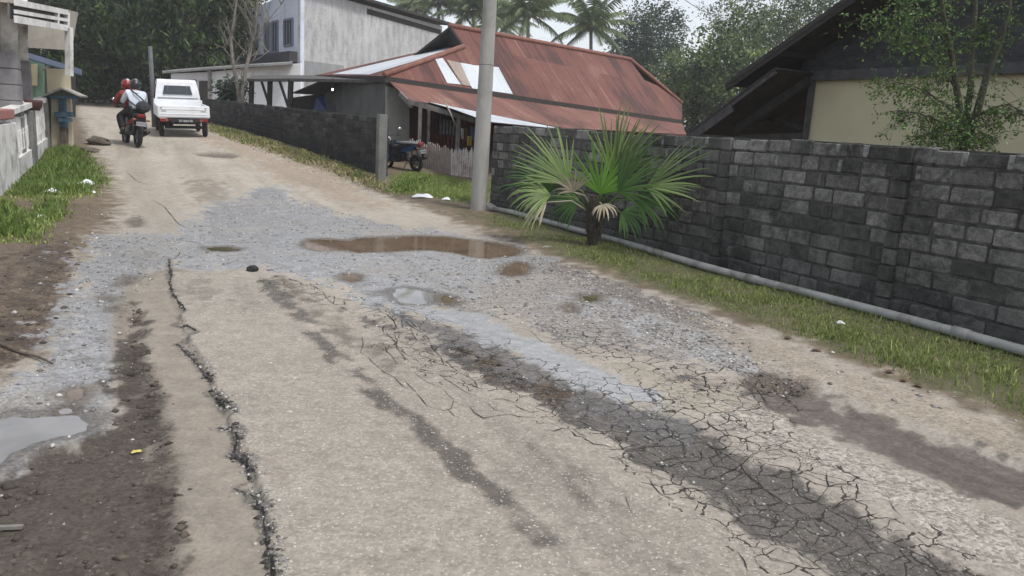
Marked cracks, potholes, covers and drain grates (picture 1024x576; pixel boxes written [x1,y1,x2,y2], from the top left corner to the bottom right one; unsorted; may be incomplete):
pothole [299,235,525,259]
crack [284,276,940,576]
pothole [387,286,441,305]
pothole [744,375,810,399]
pothole [436,294,458,306]
crack [155,201,232,410]
crack [218,427,275,576]
pothole [339,273,365,282]
pothole [0,408,105,471]
pothole [496,261,534,277]
